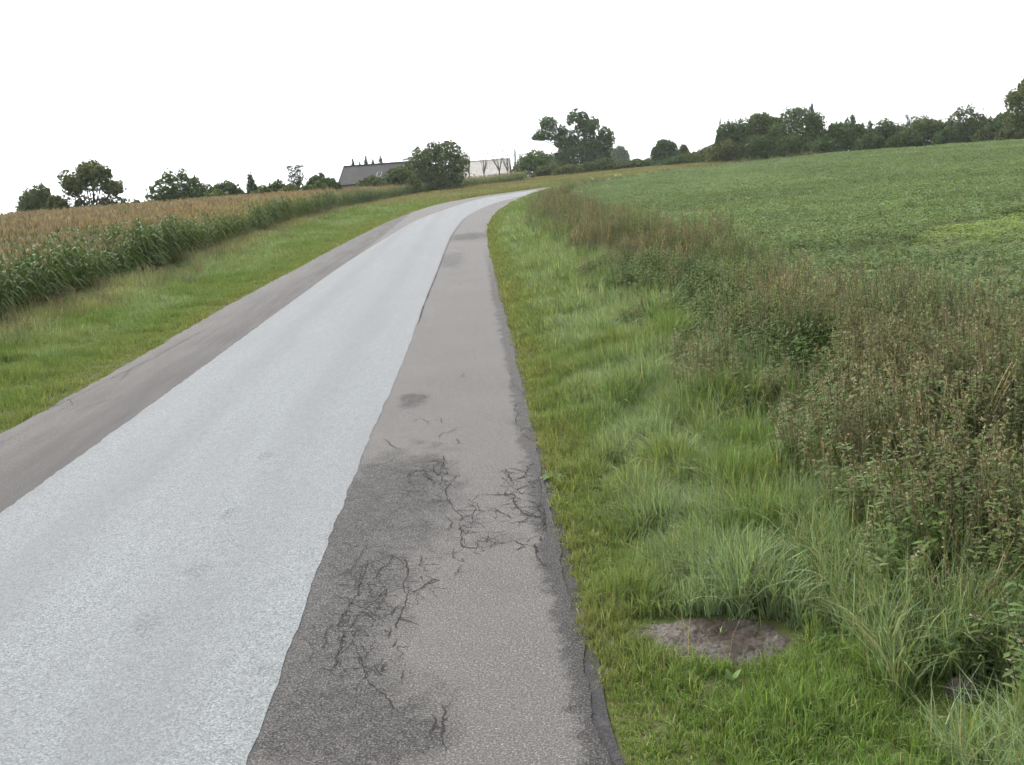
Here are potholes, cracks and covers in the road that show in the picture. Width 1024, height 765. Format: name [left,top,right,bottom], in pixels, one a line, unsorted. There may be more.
crack [306,418,557,714]
crack [510,374,532,439]
crack [427,702,452,748]
